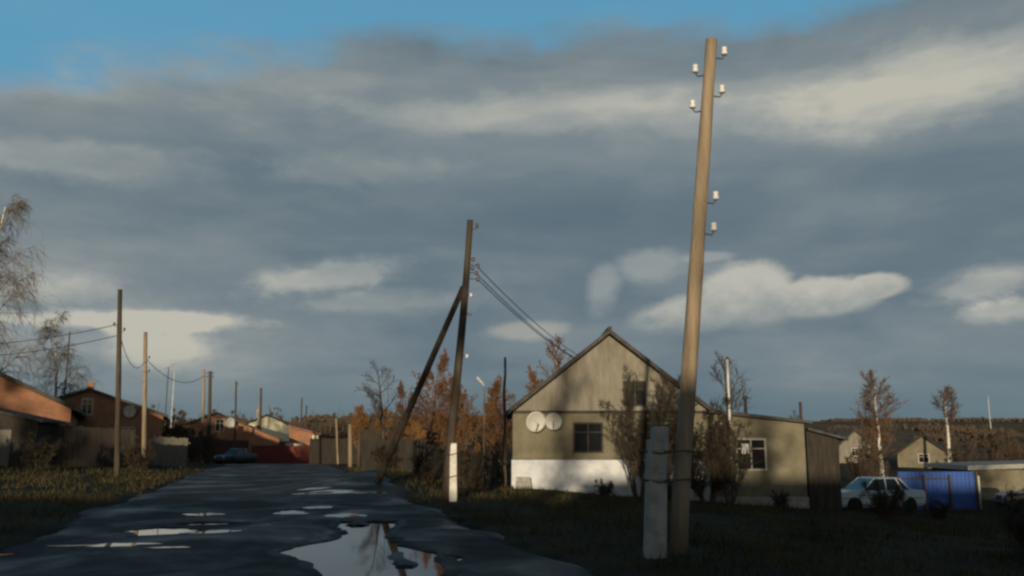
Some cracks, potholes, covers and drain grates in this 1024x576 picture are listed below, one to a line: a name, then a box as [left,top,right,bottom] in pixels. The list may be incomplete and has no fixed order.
pothole [265,520,462,576]
pothole [108,526,209,538]
